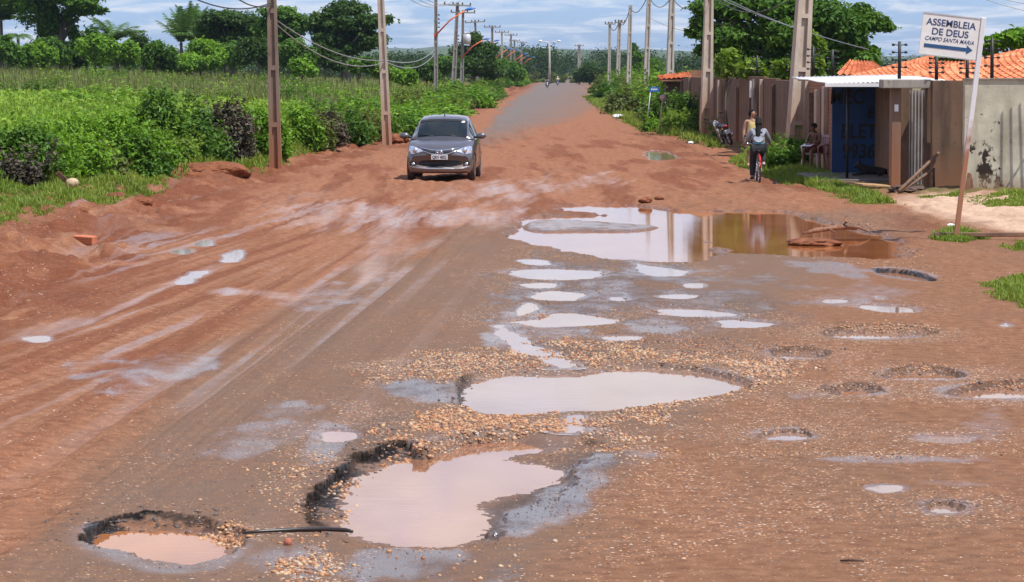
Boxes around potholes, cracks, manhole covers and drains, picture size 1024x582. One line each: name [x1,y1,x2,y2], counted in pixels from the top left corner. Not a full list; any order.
pothole [874,268,936,281]
pothole [304,426,605,553]
pothole [491,265,620,281]
pothole [942,381,1024,398]
pothole [522,288,600,301]
pothole [826,384,882,395]
pothole [769,346,832,359]
pothole [879,366,966,379]
pothole [497,201,923,262]
pothole [456,360,753,416]
pothole [754,429,813,440]
pothole [487,307,631,327]
